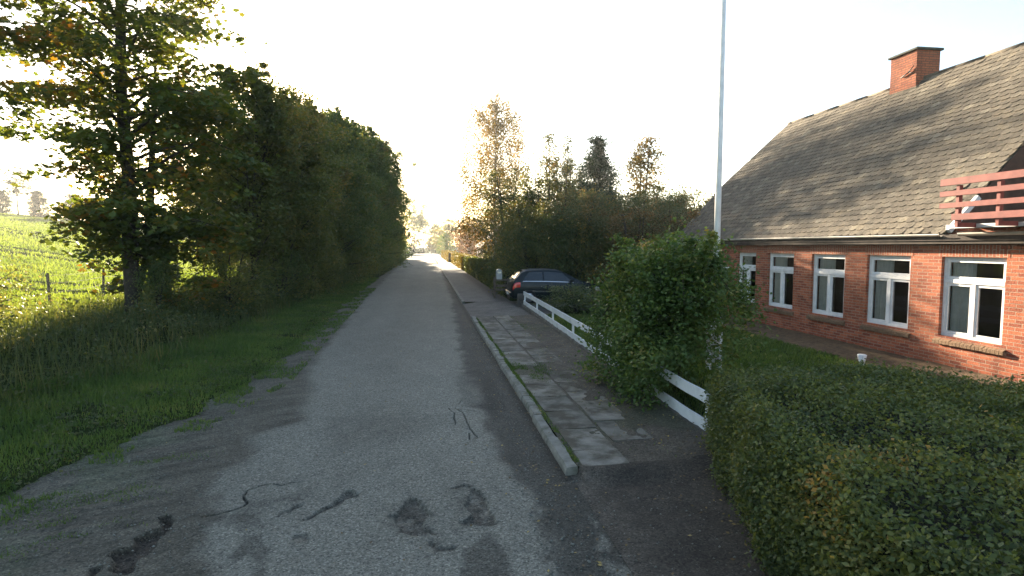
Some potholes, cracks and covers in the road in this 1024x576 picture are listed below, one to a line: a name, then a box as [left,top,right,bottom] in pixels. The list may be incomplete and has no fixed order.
crack [200,481,303,518]
pothole [385,496,438,538]
pothole [299,488,363,522]
pothole [103,513,177,576]
pothole [449,483,501,528]
crack [448,401,479,441]
